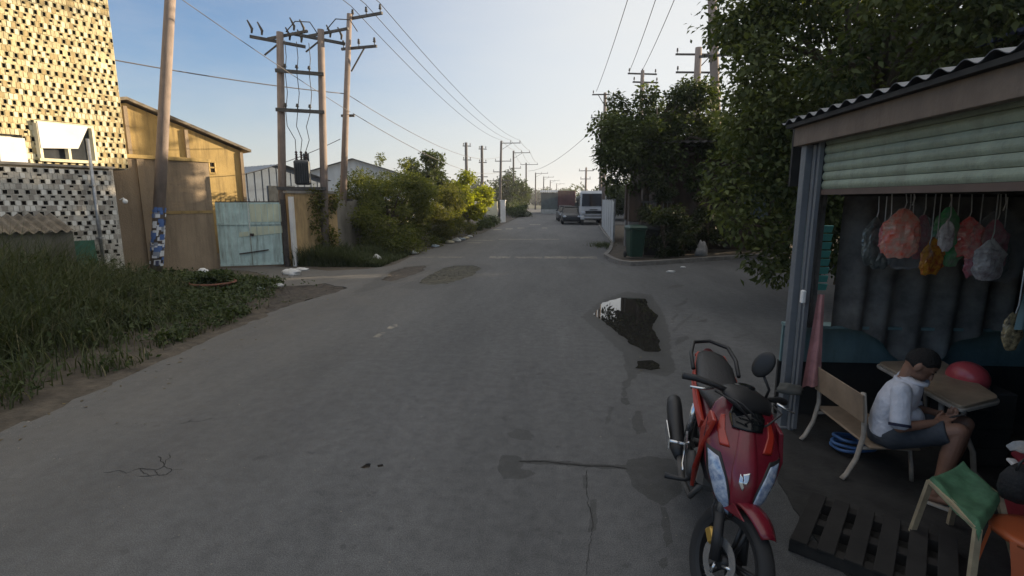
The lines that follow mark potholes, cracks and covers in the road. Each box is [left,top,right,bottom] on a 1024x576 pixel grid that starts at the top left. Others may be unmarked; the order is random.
crack [525,460,627,574]
